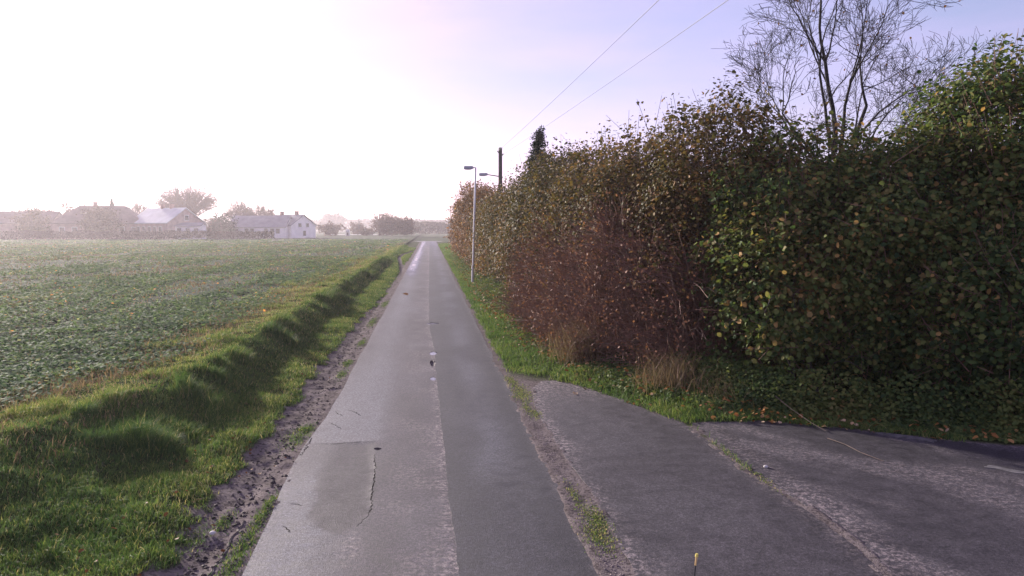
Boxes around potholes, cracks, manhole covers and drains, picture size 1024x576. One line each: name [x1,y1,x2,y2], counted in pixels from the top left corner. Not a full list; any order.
crack [331,410,377,526]
